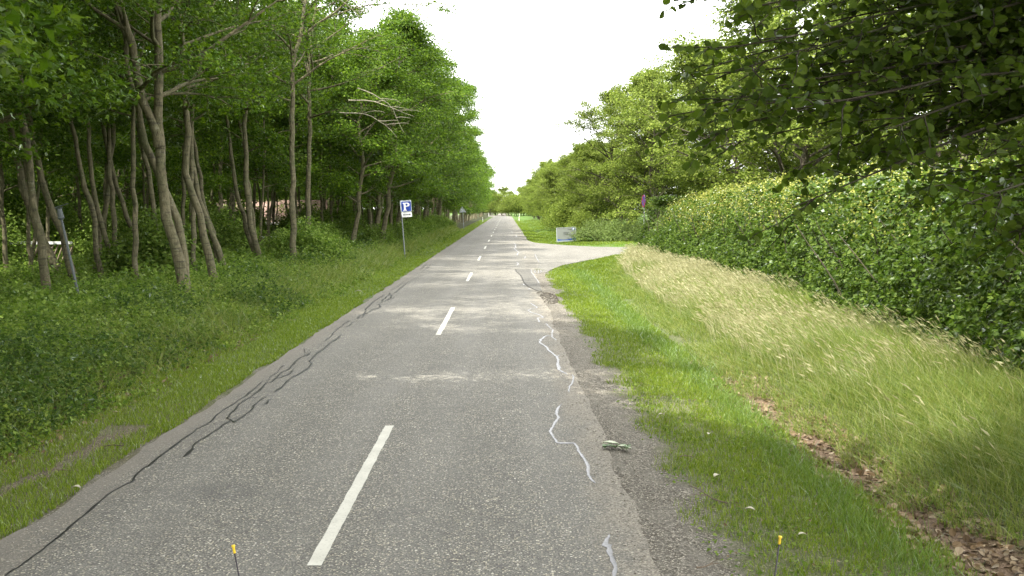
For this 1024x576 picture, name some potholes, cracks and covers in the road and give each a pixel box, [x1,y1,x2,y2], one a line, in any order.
pothole [540,292,559,304]
